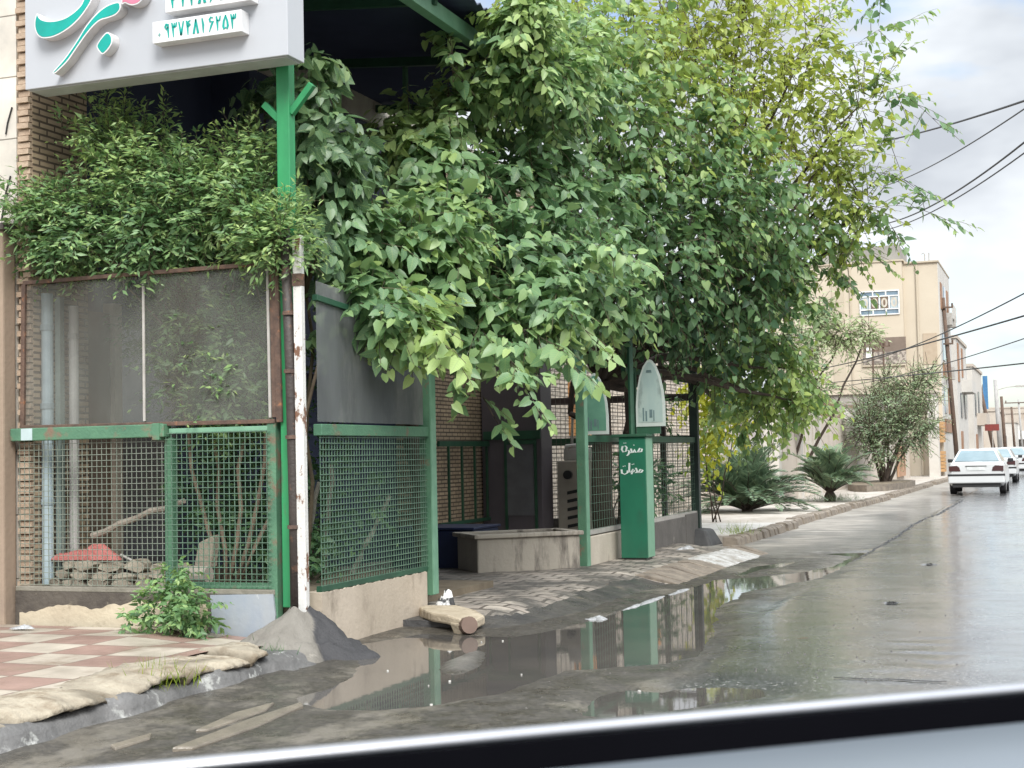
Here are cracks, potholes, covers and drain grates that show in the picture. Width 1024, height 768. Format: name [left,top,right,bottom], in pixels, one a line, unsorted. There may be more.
crack [853,499,964,561]
